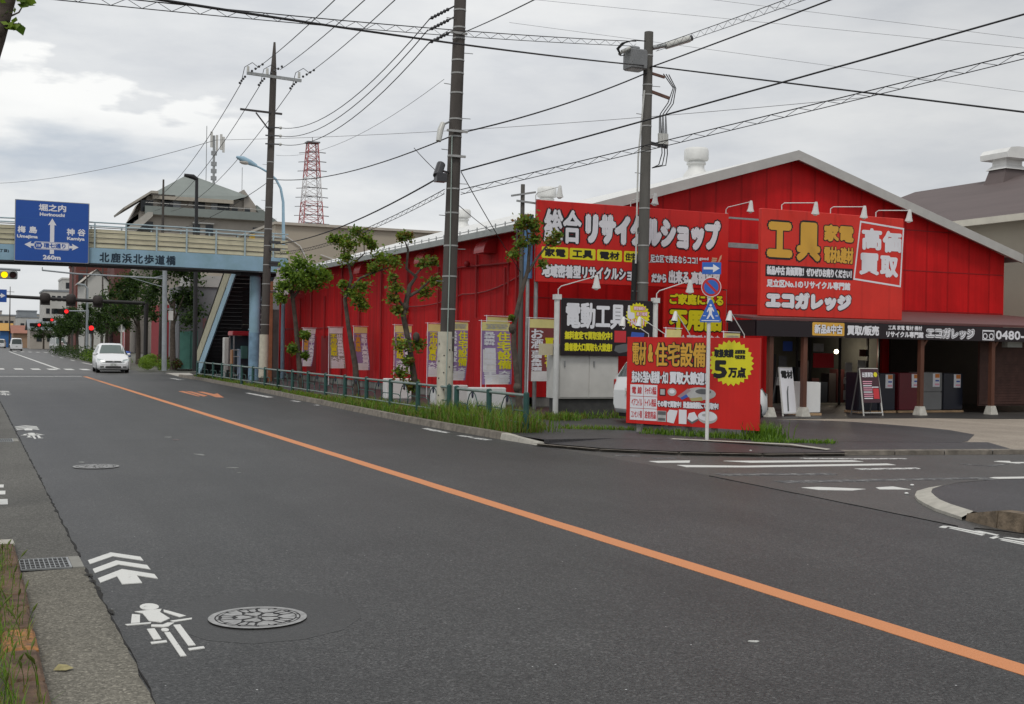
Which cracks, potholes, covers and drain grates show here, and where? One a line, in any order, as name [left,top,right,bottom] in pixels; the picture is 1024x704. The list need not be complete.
manhole cover [208,606,307,629]
